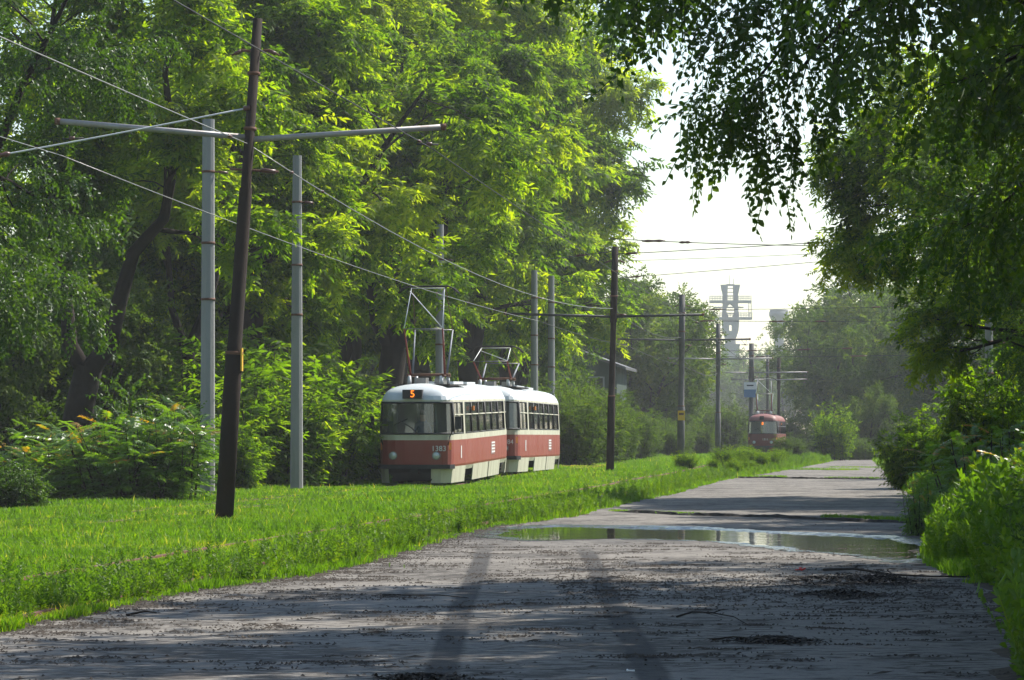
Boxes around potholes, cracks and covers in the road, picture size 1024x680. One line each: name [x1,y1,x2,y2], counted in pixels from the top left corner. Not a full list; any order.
pothole [469,524,922,563]
